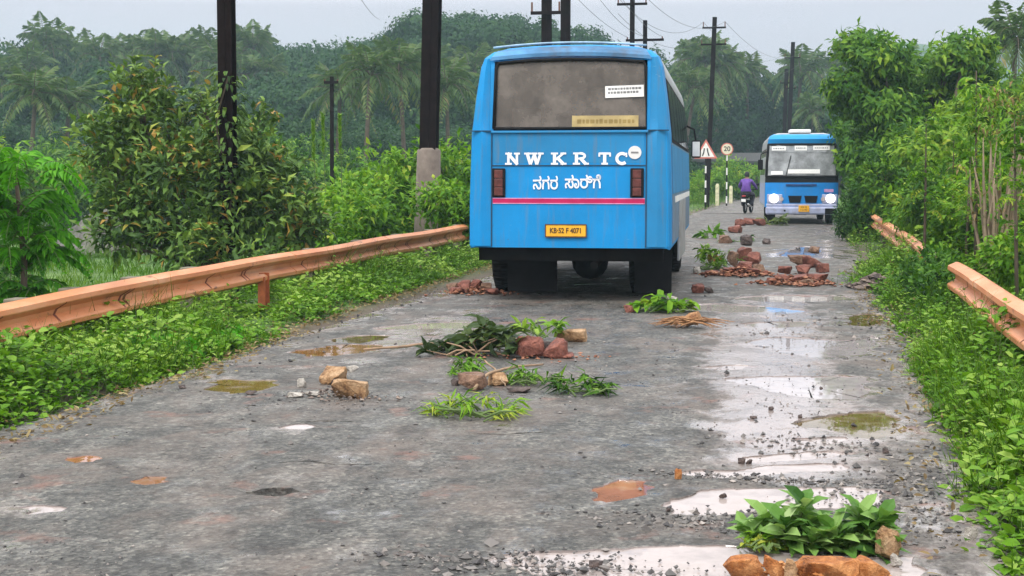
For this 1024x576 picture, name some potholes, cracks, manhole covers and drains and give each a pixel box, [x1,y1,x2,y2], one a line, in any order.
pothole [791,410,906,439]
pothole [246,487,300,497]
pothole [203,379,280,394]
